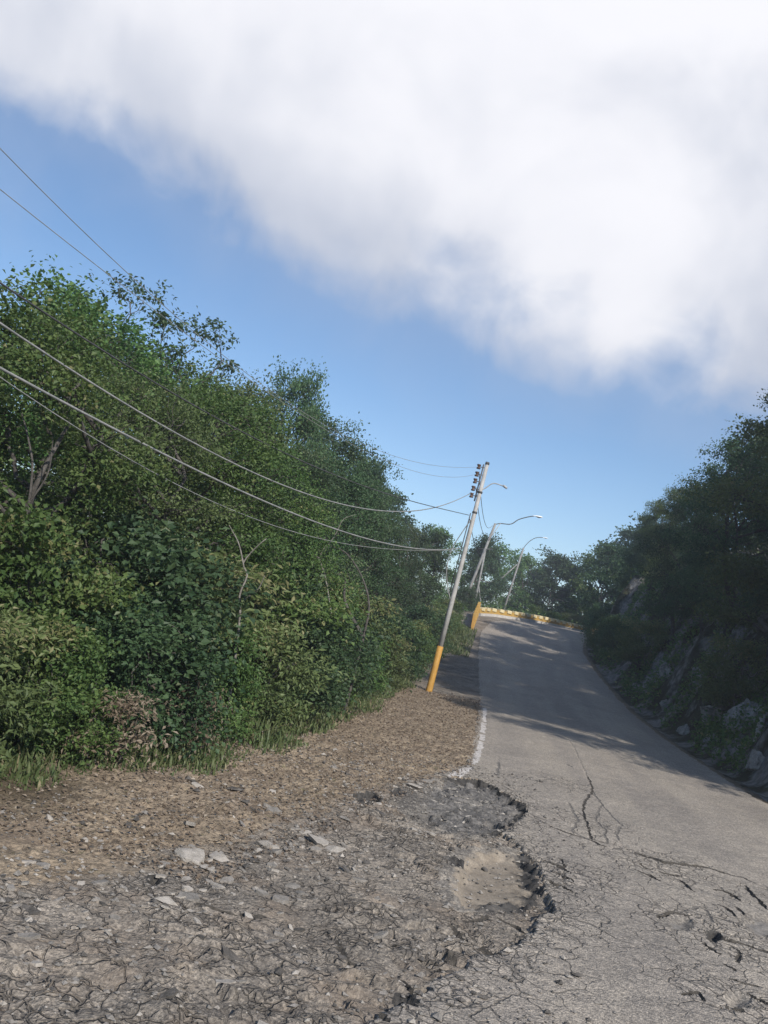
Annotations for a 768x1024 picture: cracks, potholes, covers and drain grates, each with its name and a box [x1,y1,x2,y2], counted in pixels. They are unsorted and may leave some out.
crack [550,764,768,1013]
pothole [391,777,528,843]
pothole [434,844,546,916]
